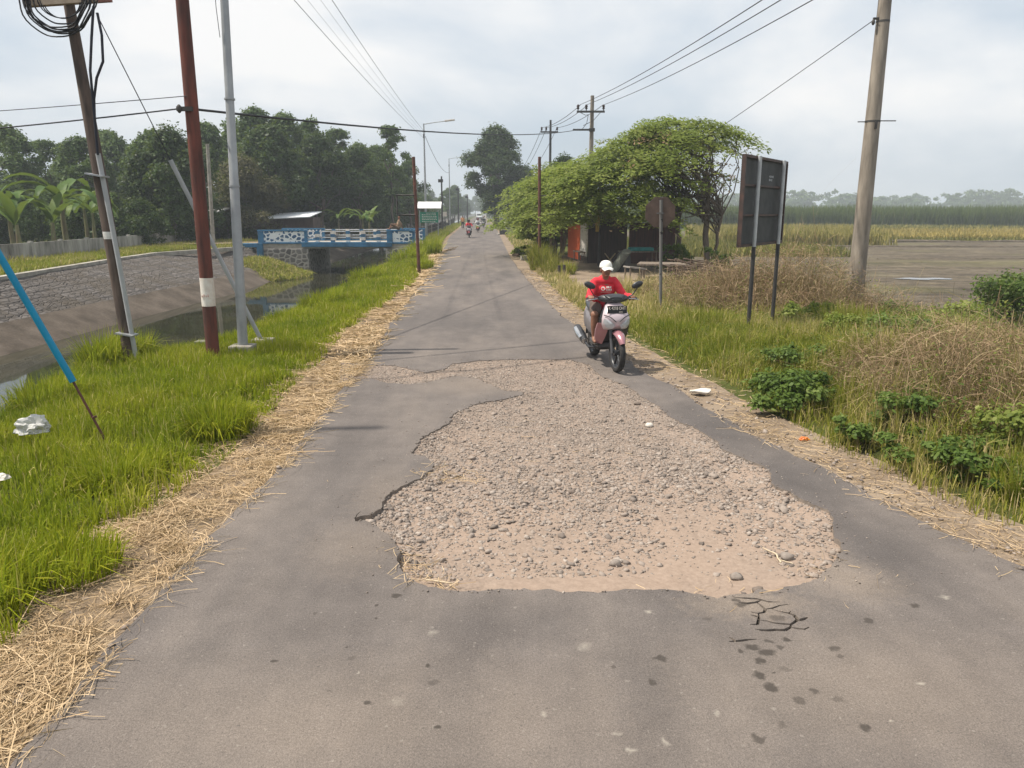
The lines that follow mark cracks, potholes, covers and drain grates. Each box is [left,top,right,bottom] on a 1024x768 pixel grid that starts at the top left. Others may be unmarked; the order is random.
pothole [339,358,847,599]
crack [756,610,803,631]
